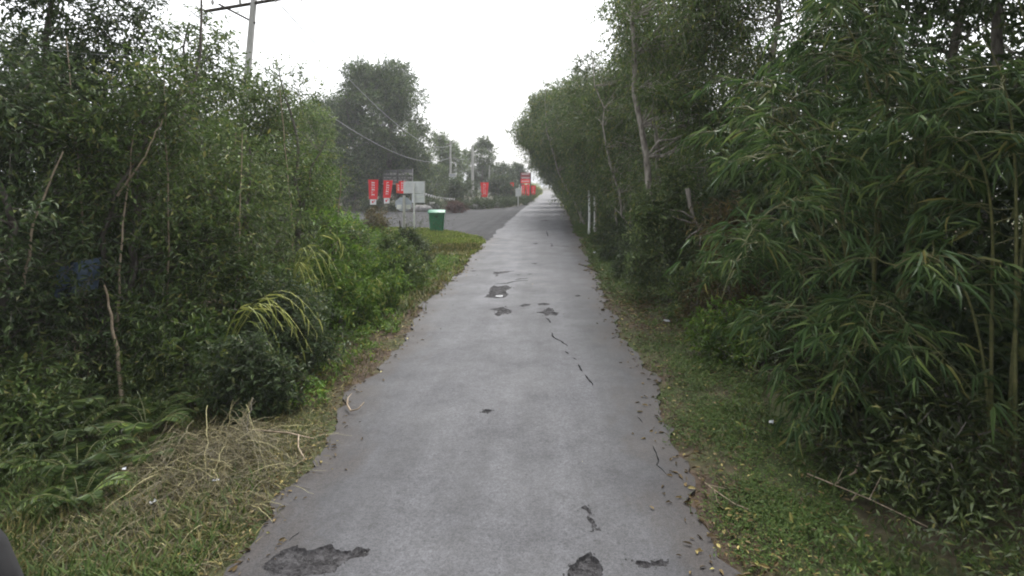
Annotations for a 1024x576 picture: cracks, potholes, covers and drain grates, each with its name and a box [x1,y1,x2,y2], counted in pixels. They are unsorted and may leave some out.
crack [546,318,593,386]
pothole [262,542,370,576]
pothole [490,306,512,316]
pothole [563,549,603,576]
pothole [485,285,512,298]
pothole [625,558,672,570]
